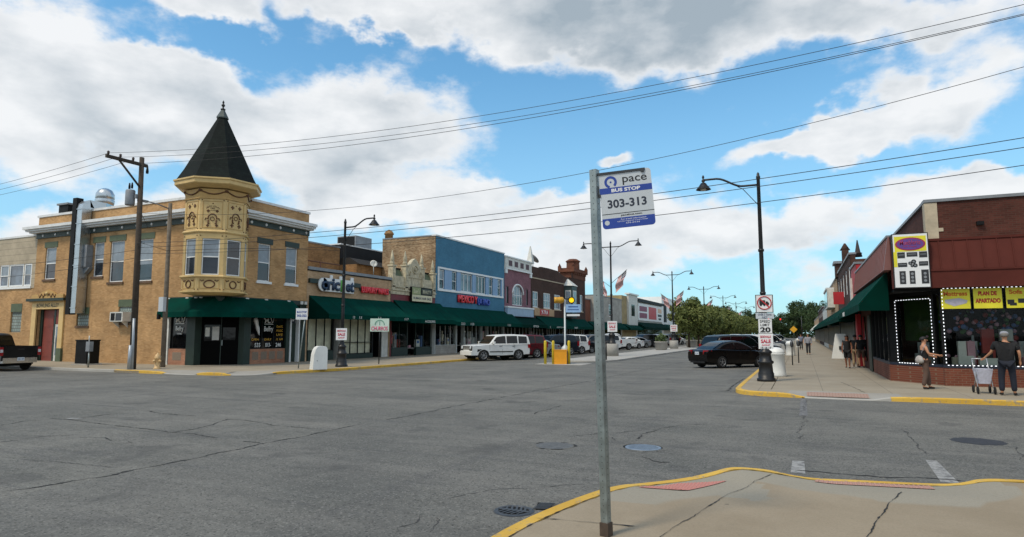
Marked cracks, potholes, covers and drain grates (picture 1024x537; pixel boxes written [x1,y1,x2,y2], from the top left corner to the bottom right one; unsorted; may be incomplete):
crack [4,411,318,443]
manhole cover [618,443,669,452]
manhole cover [950,437,1009,445]
drain grate [493,502,555,517]
